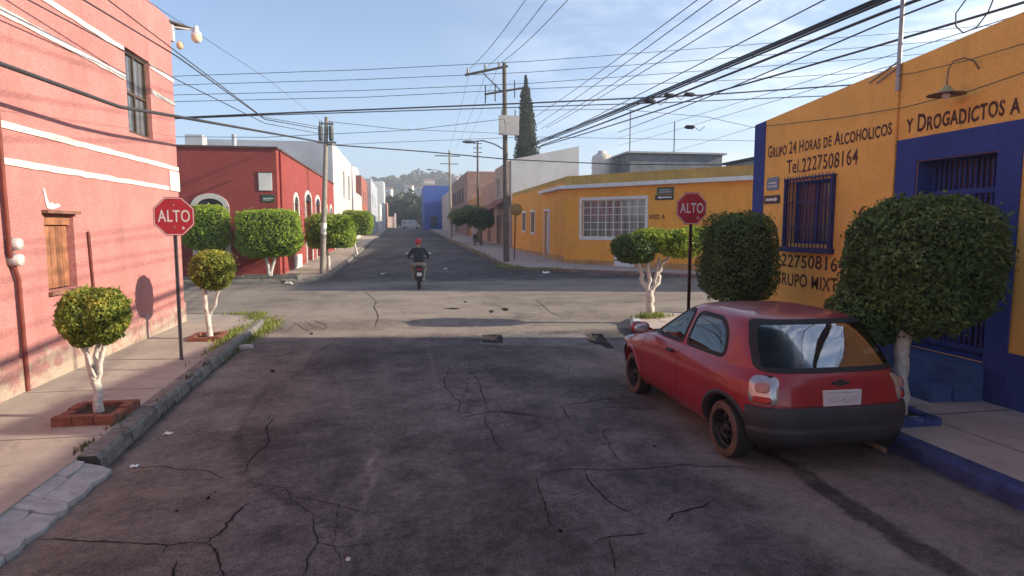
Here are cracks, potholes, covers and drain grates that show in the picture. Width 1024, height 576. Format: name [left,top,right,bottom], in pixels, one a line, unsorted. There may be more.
crack [53,502,249,576]
pothole [587,334,614,349]
crack [596,533,643,569]
pothole [481,334,503,343]
crack [120,416,373,574]
crack [536,428,778,524]
crack [443,361,558,452]
